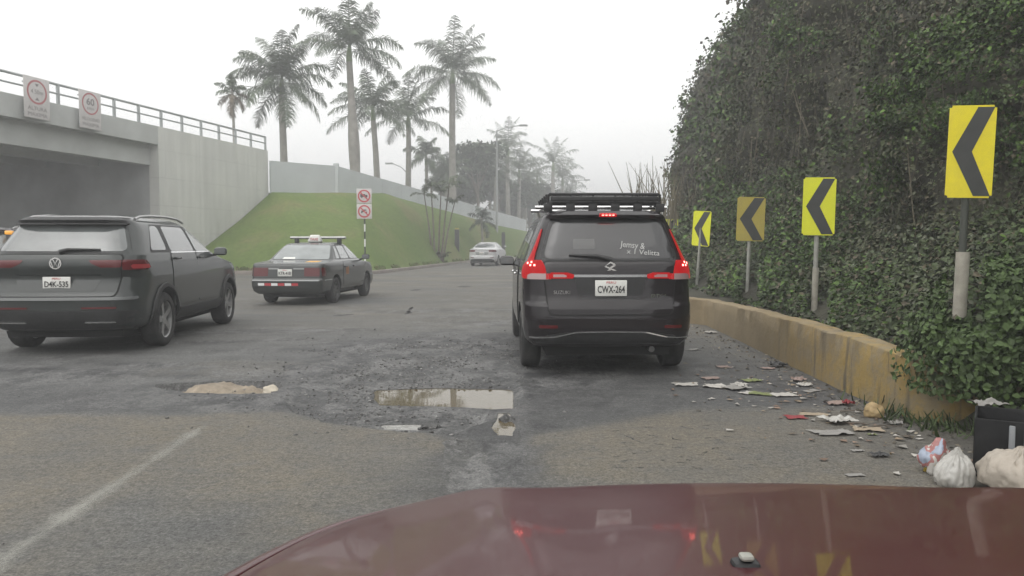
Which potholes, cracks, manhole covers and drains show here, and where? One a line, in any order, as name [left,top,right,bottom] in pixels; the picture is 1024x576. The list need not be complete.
pothole [155,380,283,394]
pothole [284,342,524,436]
